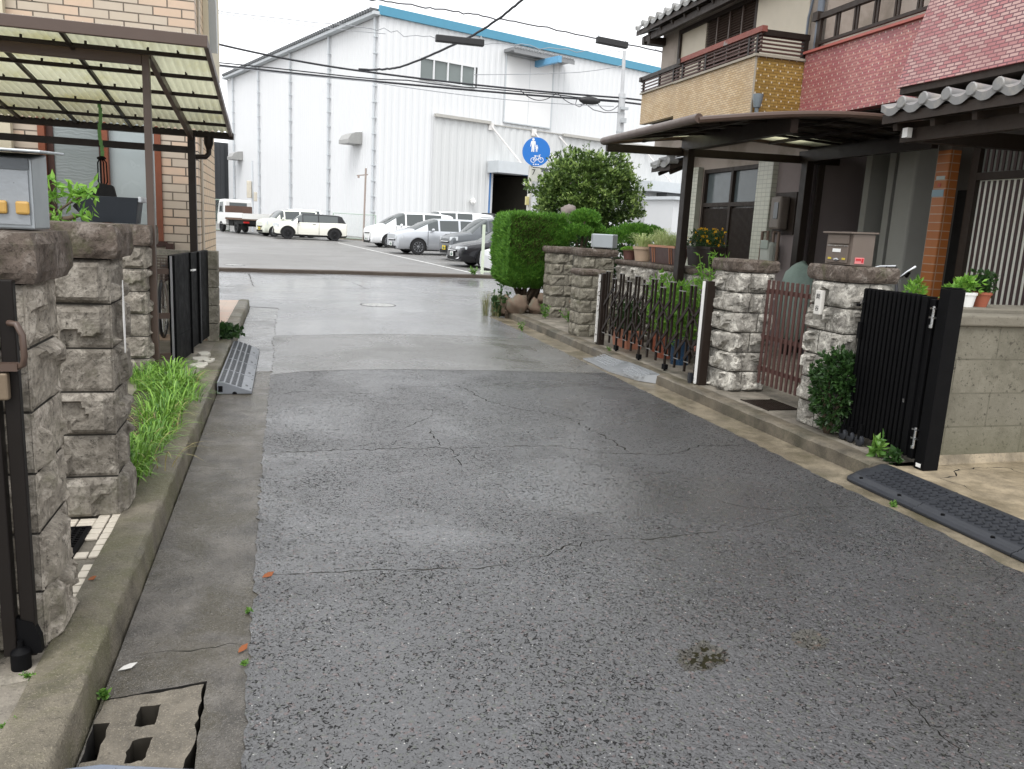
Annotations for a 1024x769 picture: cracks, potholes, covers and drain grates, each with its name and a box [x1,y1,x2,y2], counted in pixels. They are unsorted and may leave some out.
crack [289,564,512,575]
crack [940,467,1021,491]
crack [276,384,733,465]
drain grate [71,526,92,559]
crack [865,667,982,769]
